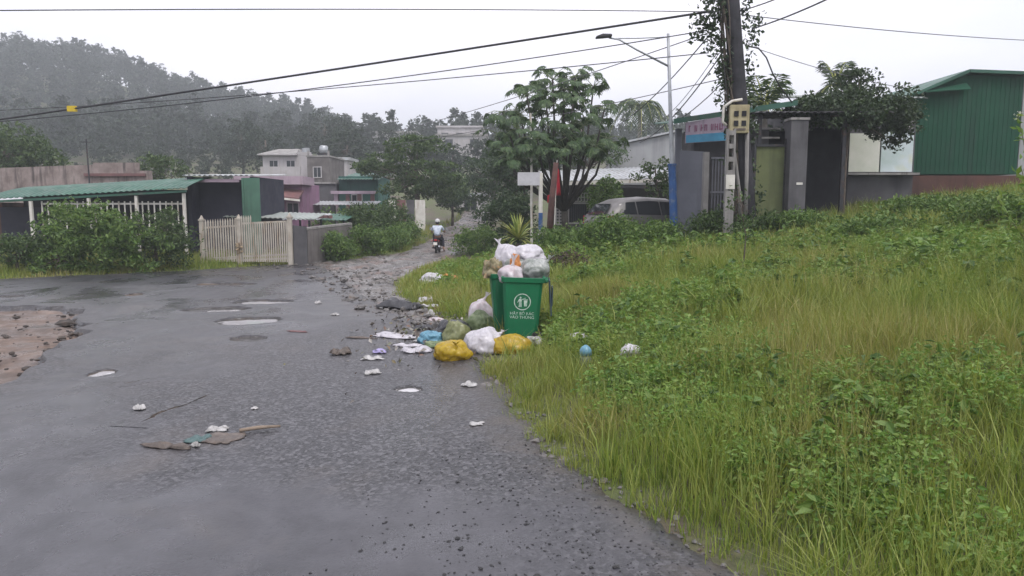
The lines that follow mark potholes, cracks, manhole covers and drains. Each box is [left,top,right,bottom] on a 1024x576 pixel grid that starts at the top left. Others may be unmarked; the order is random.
pothole [220,298,305,306]
pothole [0,303,122,392]
pothole [214,333,282,345]
pothole [200,315,295,327]
